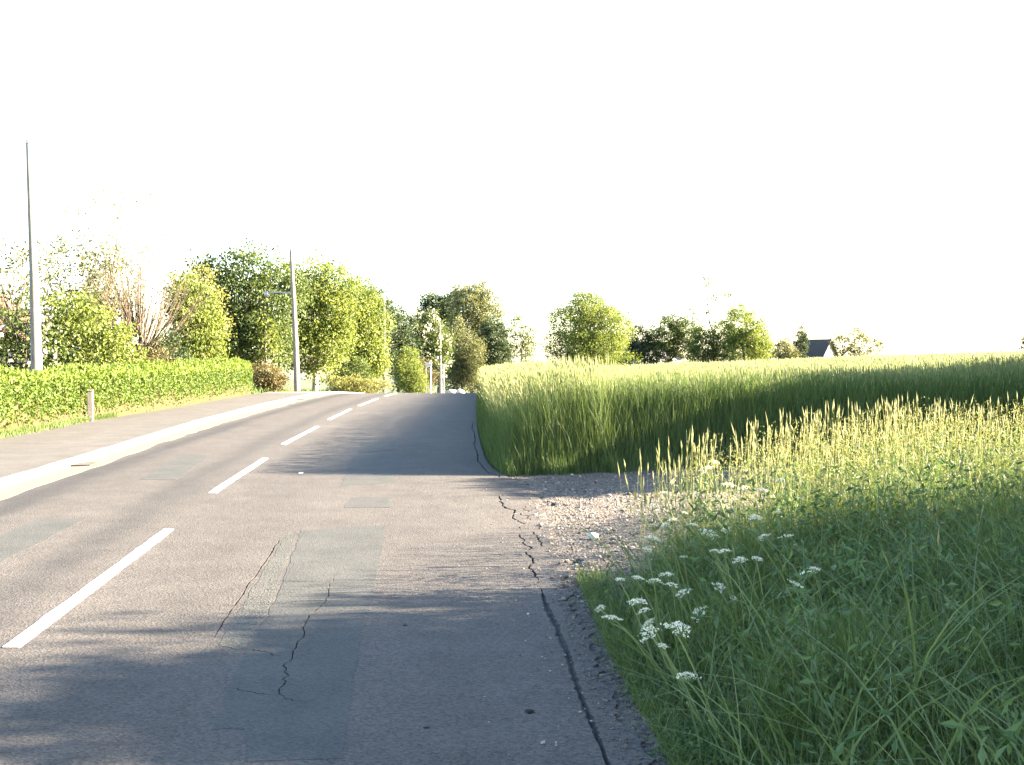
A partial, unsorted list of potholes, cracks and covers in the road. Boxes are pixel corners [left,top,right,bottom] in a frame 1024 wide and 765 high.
crack [237,577,335,702]
crack [498,496,611,765]
crack [472,424,502,478]
